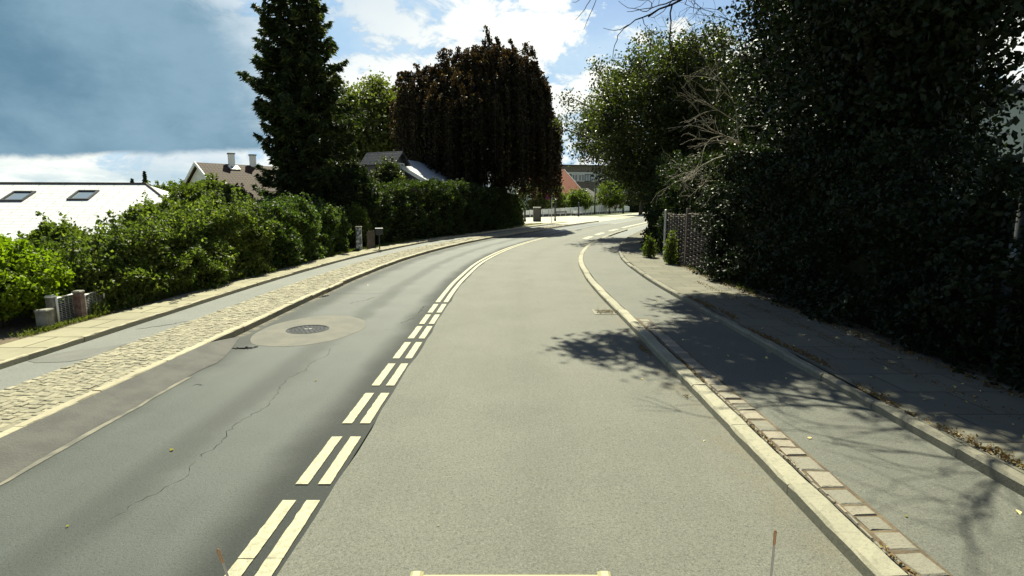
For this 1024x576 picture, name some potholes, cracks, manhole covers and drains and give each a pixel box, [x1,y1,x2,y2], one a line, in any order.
manhole cover [286,325,329,334]
crack [114,349,330,517]
